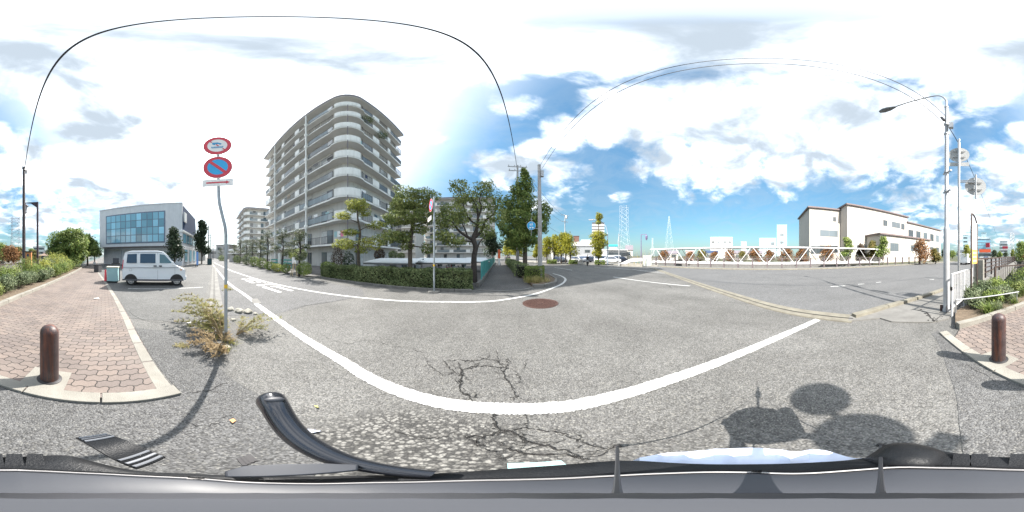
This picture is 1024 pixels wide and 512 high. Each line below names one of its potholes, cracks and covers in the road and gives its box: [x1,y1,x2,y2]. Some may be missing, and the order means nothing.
manhole cover [523,299,558,309]
crack [325,336,614,461]
